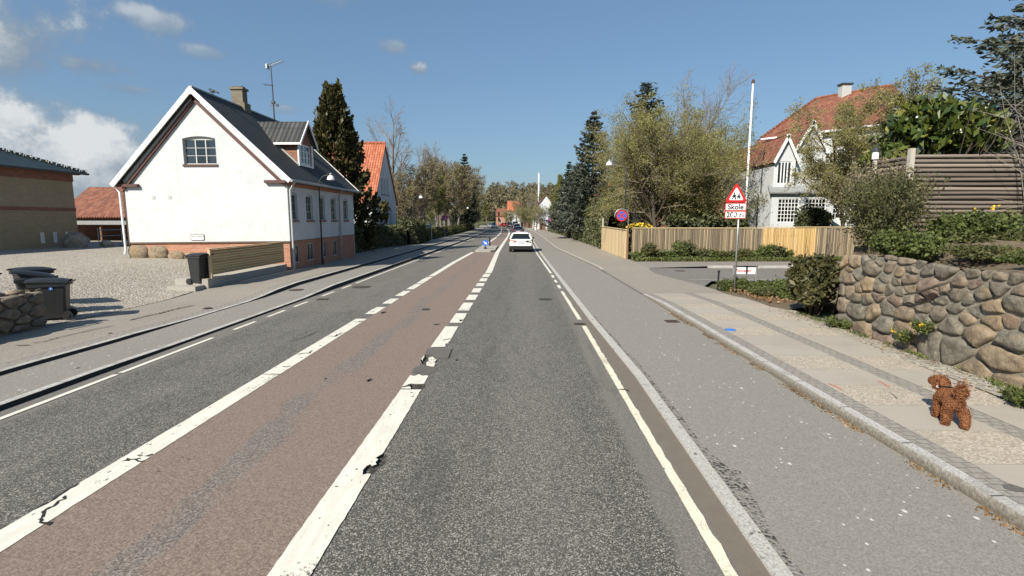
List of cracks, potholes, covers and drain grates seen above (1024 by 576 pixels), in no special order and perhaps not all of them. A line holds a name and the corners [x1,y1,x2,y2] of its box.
pothole [363,453,387,475]
crack [34,483,79,525]
